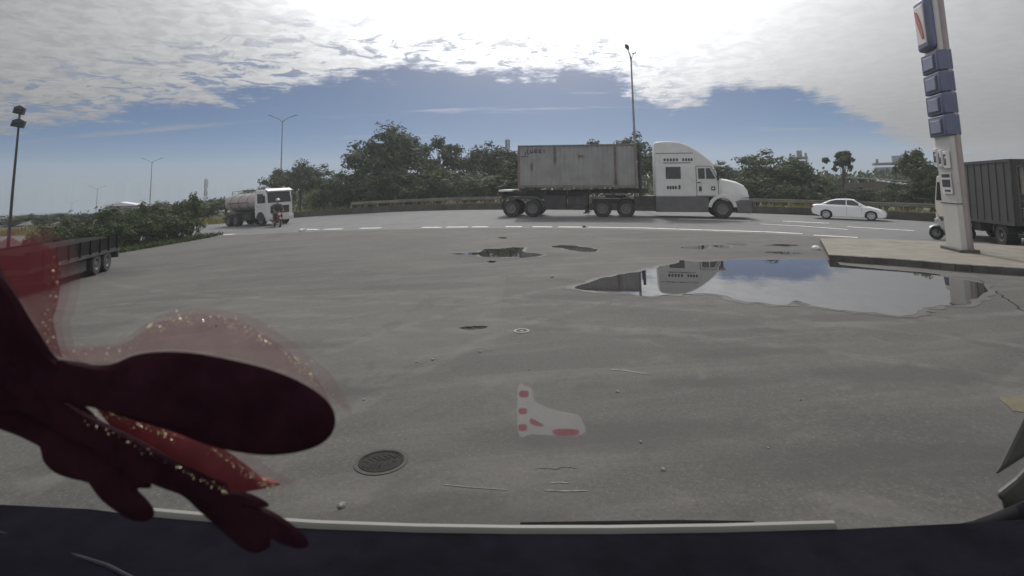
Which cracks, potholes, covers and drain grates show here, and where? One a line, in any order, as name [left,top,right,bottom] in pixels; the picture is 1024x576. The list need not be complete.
manhole cover [353,448,408,476]
